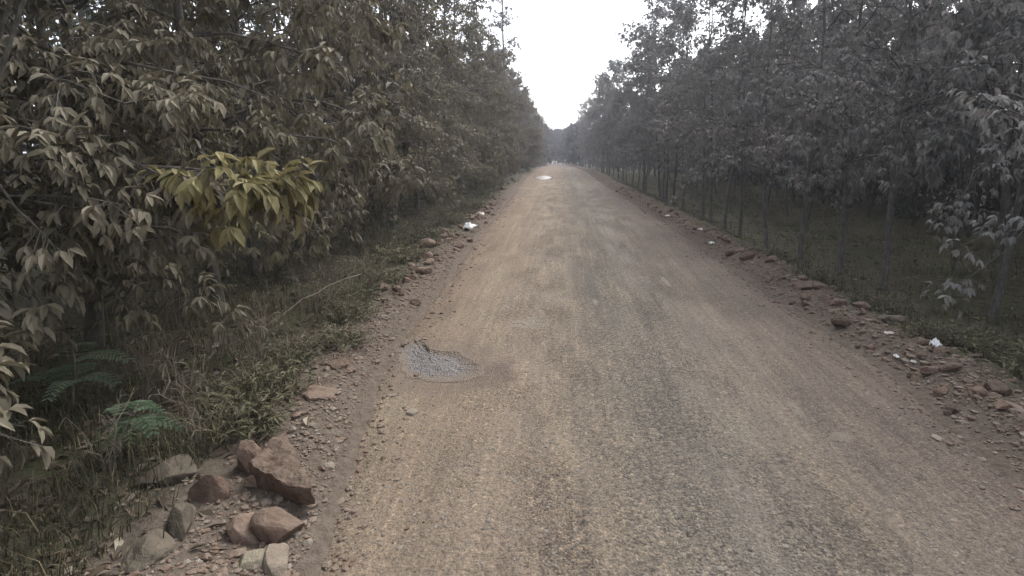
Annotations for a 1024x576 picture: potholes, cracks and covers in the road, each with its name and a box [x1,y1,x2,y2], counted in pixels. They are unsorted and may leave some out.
pothole [394,337,486,382]
